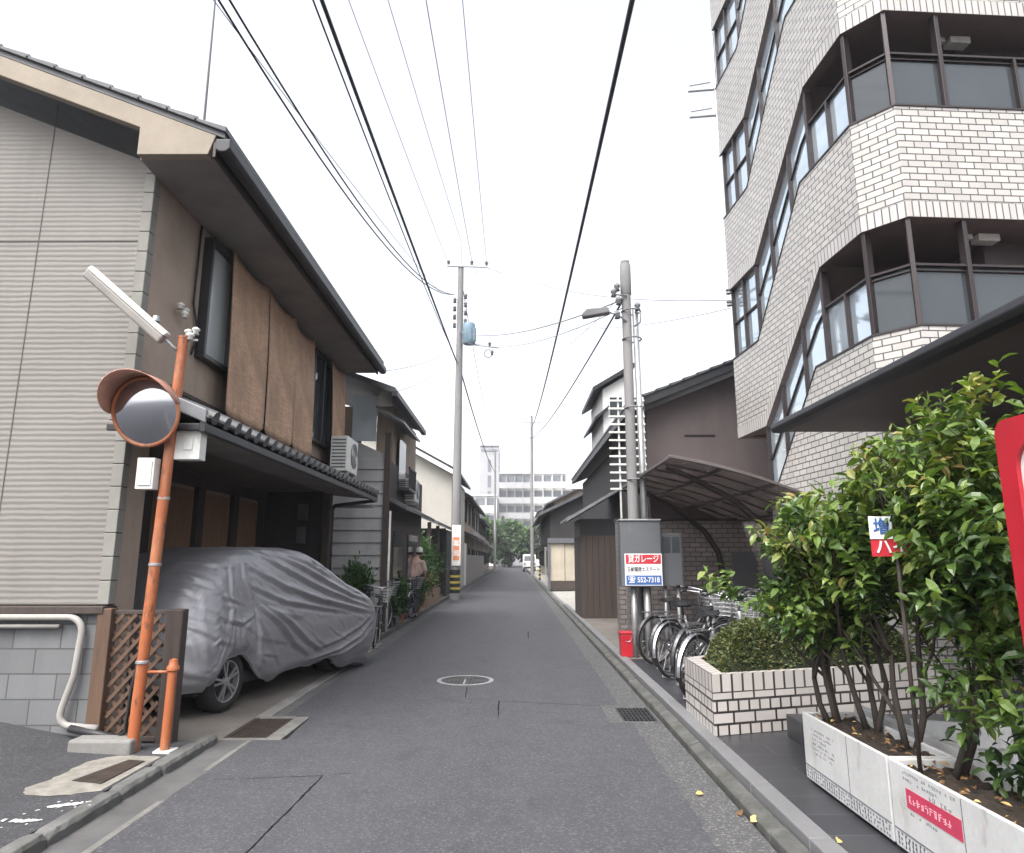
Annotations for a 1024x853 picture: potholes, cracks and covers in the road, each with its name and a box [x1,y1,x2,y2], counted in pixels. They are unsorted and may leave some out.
drain grate [220,716,310,741]
manhole cover [437,675,494,685]
drain grate [600,705,659,723]
